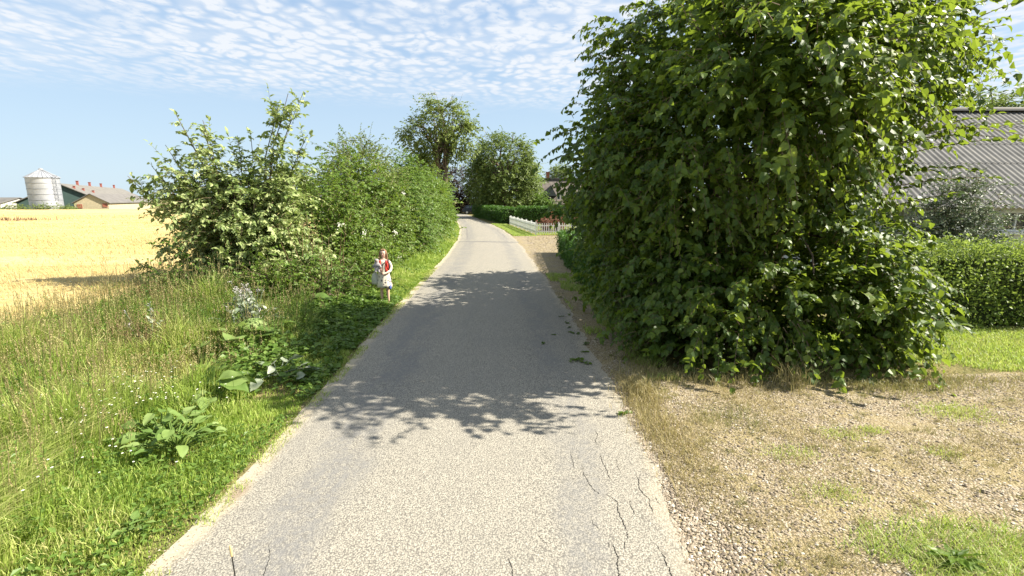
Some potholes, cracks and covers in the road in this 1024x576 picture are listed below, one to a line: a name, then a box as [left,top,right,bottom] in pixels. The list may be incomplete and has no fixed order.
crack [571,432,659,576]
